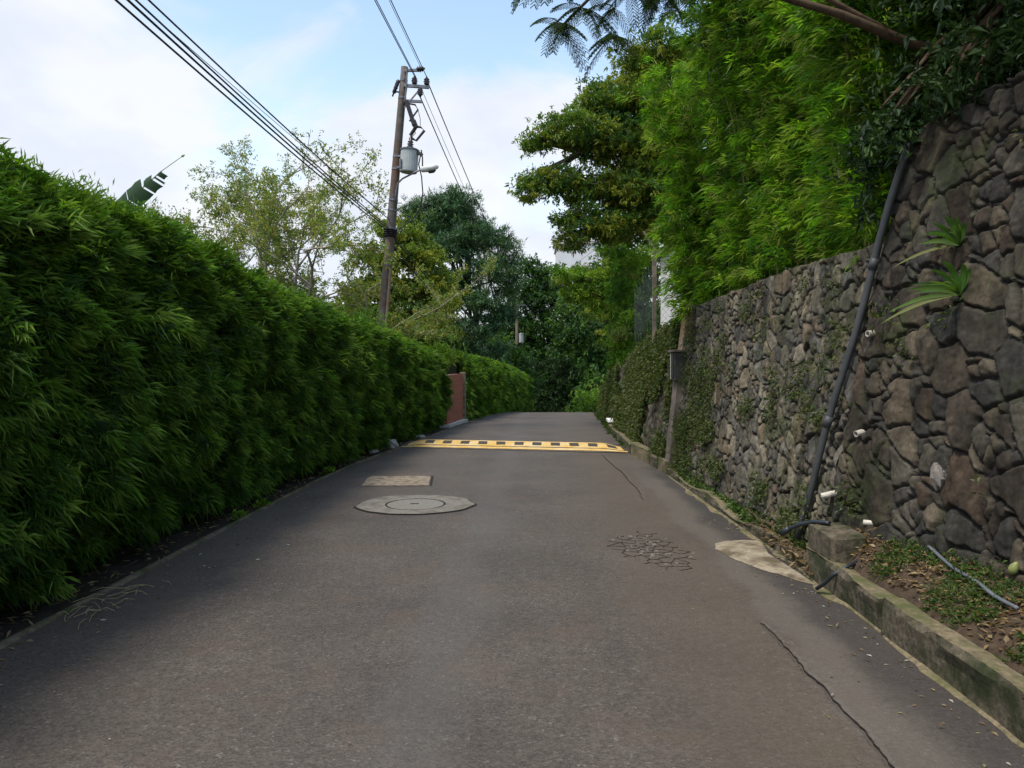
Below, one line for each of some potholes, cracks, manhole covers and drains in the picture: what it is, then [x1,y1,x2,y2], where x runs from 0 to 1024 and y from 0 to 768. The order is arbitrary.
crack [760,622,895,768]
manhole cover [353,495,477,515]
crack [606,531,697,571]
